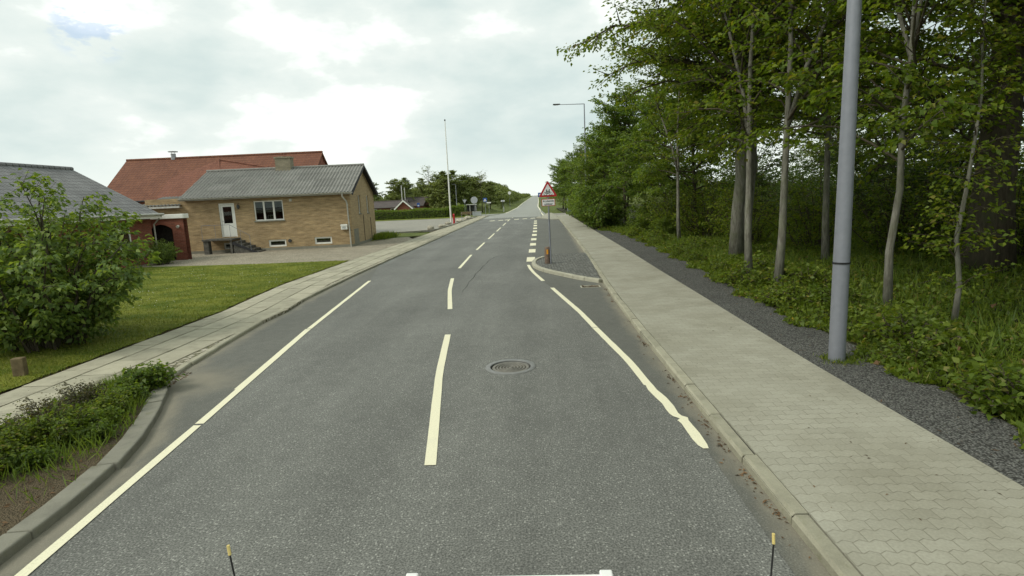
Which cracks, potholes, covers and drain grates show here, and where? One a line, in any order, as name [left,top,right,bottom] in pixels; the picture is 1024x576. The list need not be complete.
manhole cover [485,359,536,375]
